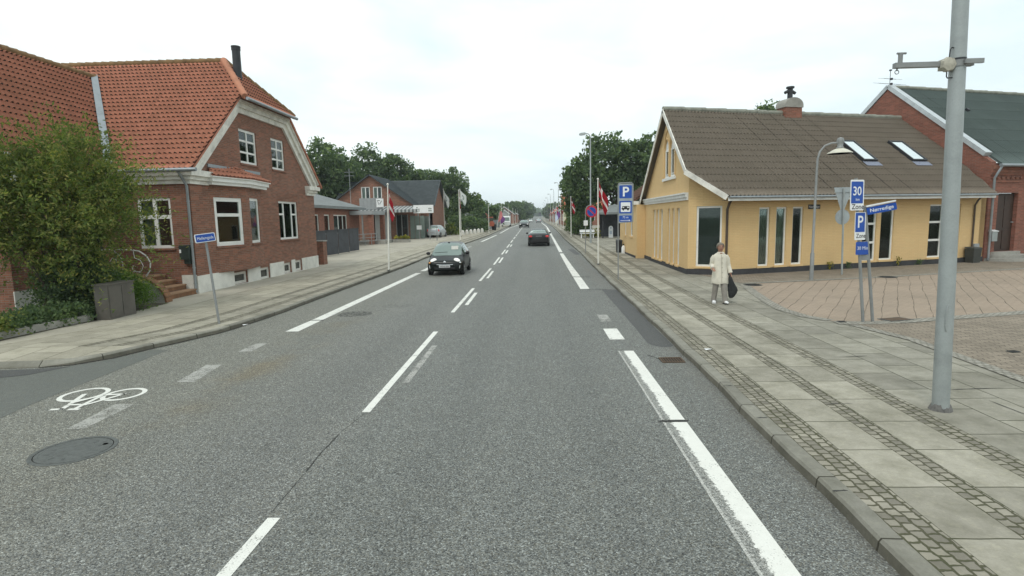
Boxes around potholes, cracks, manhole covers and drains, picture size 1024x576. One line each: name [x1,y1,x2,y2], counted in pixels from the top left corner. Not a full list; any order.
crack [273,416,361,510]
manhole cover [26,436,119,466]
